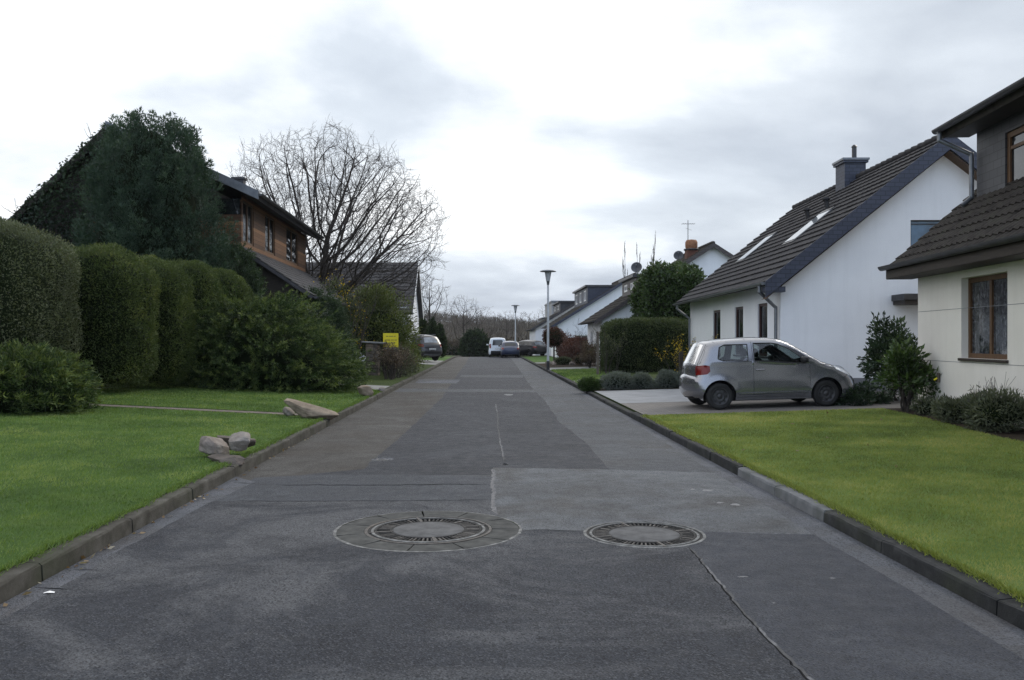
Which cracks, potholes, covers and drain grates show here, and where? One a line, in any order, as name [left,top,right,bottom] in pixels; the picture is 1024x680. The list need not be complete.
manhole cover [333,511,522,552]
manhole cover [583,521,706,548]
